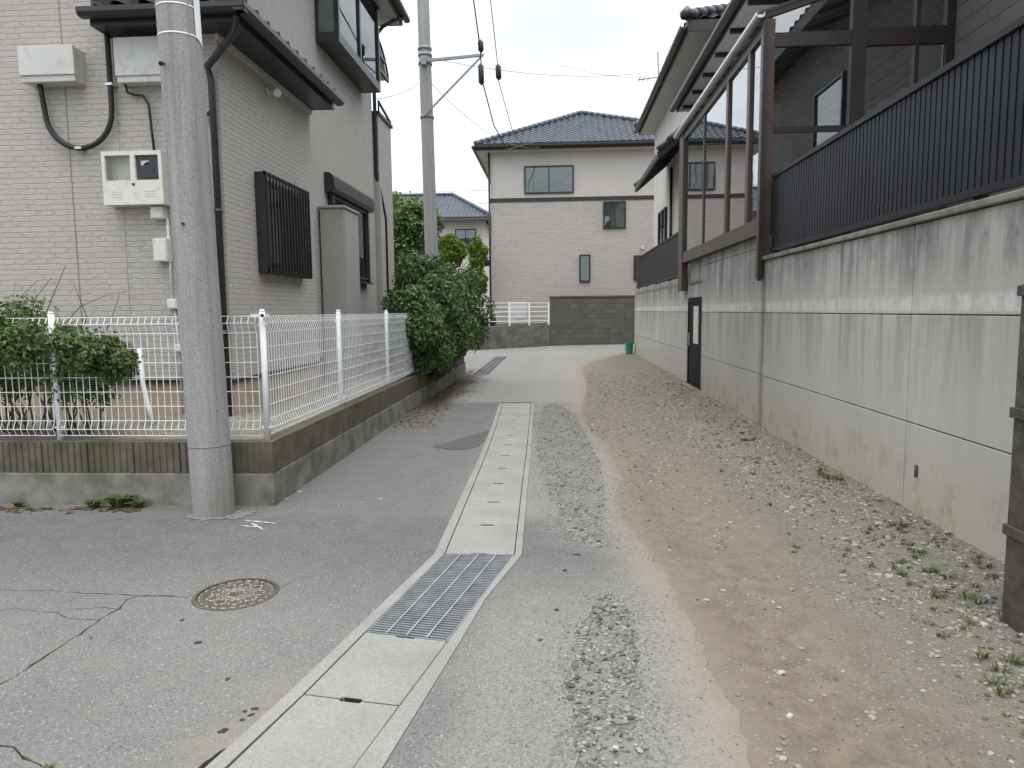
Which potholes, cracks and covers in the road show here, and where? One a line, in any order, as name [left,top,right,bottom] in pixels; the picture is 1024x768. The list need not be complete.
crack [0,590,188,685]
crack [0,745,42,766]
drain grate [367,554,514,642]
manhole cover [192,578,279,611]
